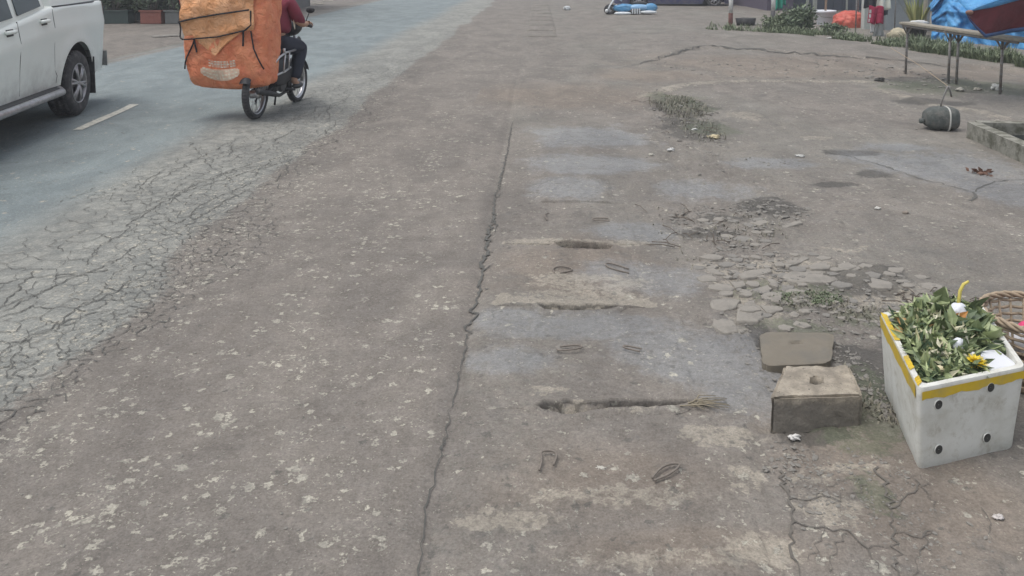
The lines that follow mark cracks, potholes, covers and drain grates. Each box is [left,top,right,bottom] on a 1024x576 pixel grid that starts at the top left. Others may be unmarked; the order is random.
crack [0,30,471,441]
crack [634,45,960,68]
pothole [523,396,707,422]
crack [824,151,1021,201]
crack [778,466,992,576]
crack [417,122,513,576]
pothole [548,239,620,251]
